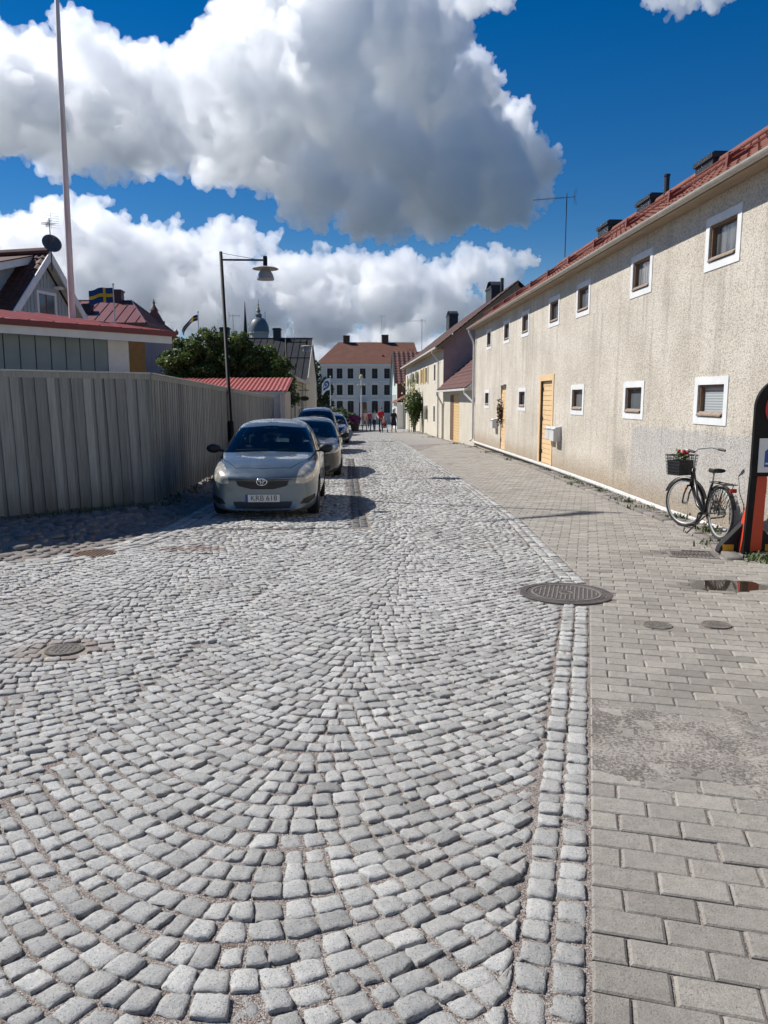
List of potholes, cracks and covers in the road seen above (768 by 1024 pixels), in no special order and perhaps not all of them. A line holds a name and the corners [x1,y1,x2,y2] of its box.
utility cover [643,621,673,630]
manhole cover [520,583,613,606]
manhole cover [44,643,84,657]
utility cover [701,620,732,630]
drain grate [665,549,720,559]
